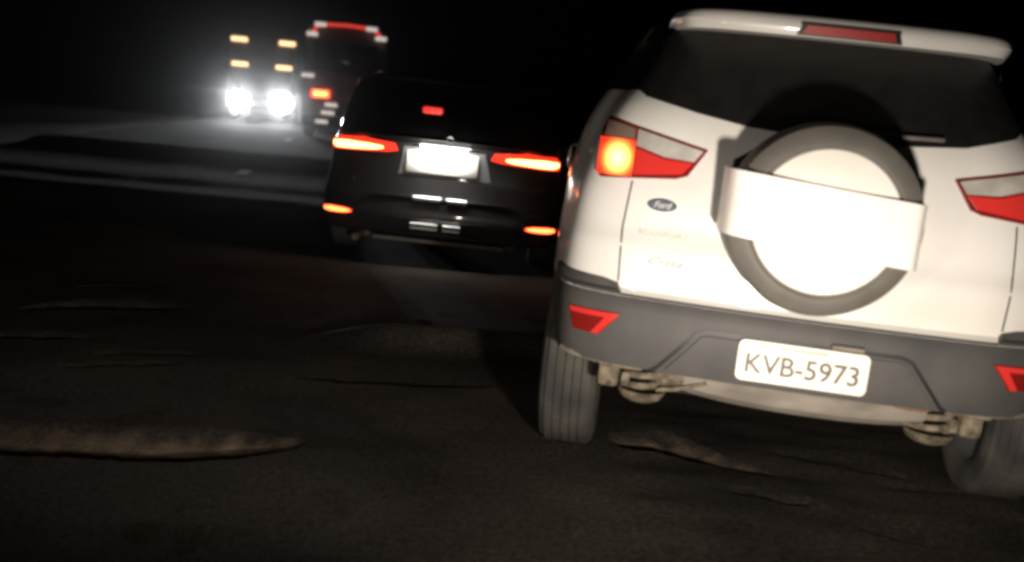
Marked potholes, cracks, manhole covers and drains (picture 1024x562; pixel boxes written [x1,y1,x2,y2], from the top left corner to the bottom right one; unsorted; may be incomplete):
crack [295,377,498,388]
pothole [0,419,307,463]
pothole [609,430,775,476]
